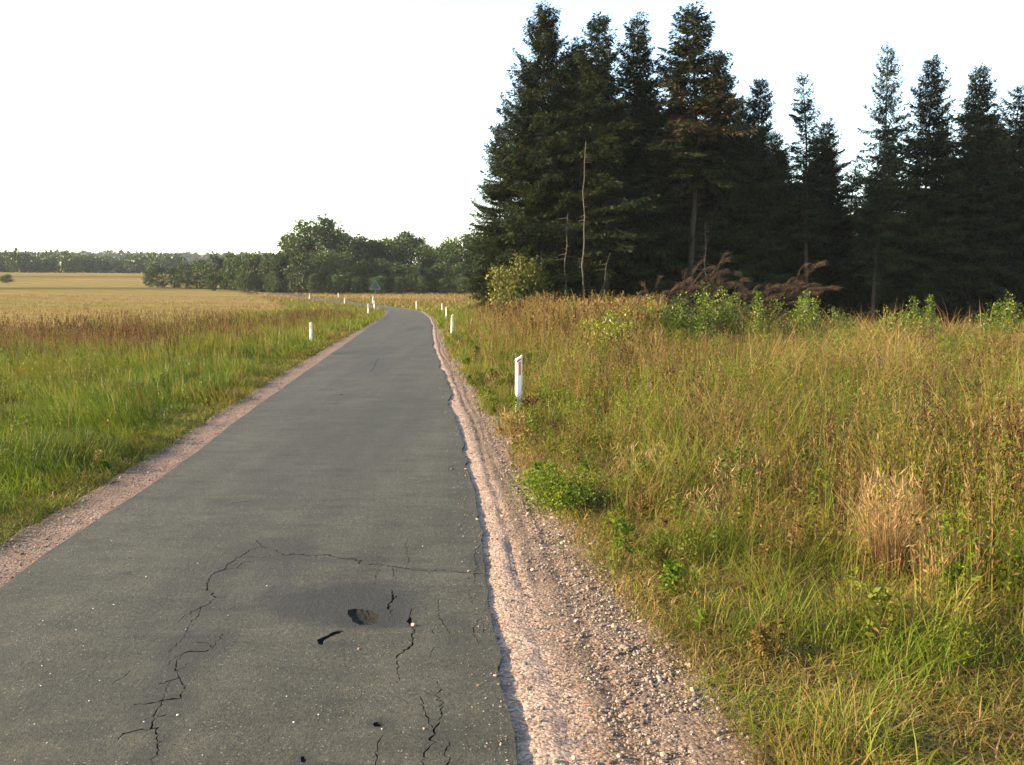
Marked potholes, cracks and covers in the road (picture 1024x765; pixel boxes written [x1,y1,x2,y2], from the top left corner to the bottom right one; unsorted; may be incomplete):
pothole [347,609,380,625]
crack [118,538,483,765]
pothole [317,630,344,645]
